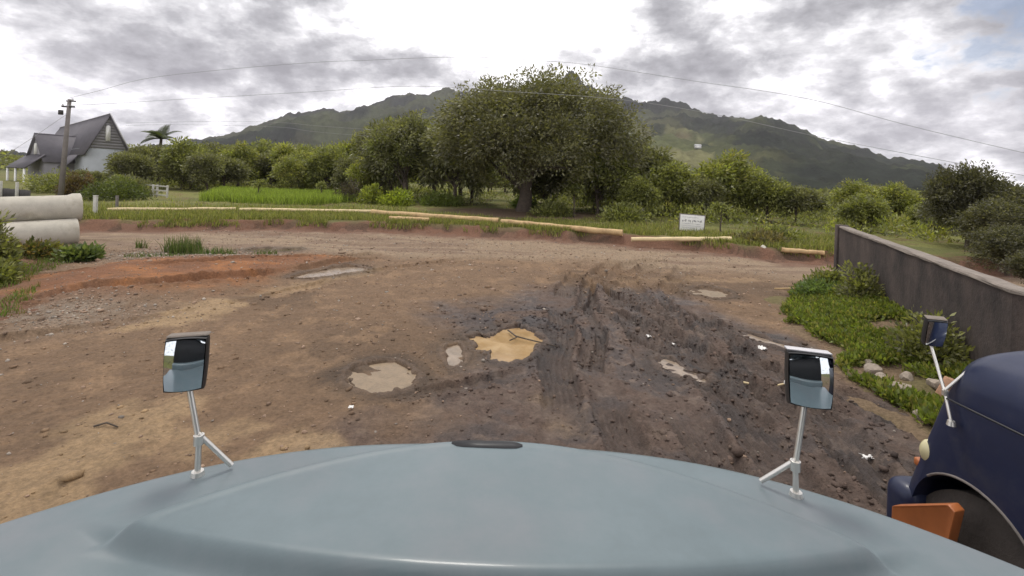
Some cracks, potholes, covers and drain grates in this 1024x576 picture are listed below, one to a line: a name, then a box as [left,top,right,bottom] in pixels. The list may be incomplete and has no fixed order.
pothole [436,340,474,370]
pothole [333,356,428,399]
pothole [458,320,554,366]
pothole [285,262,371,279]
pothole [646,352,721,388]
pothole [681,284,738,300]
